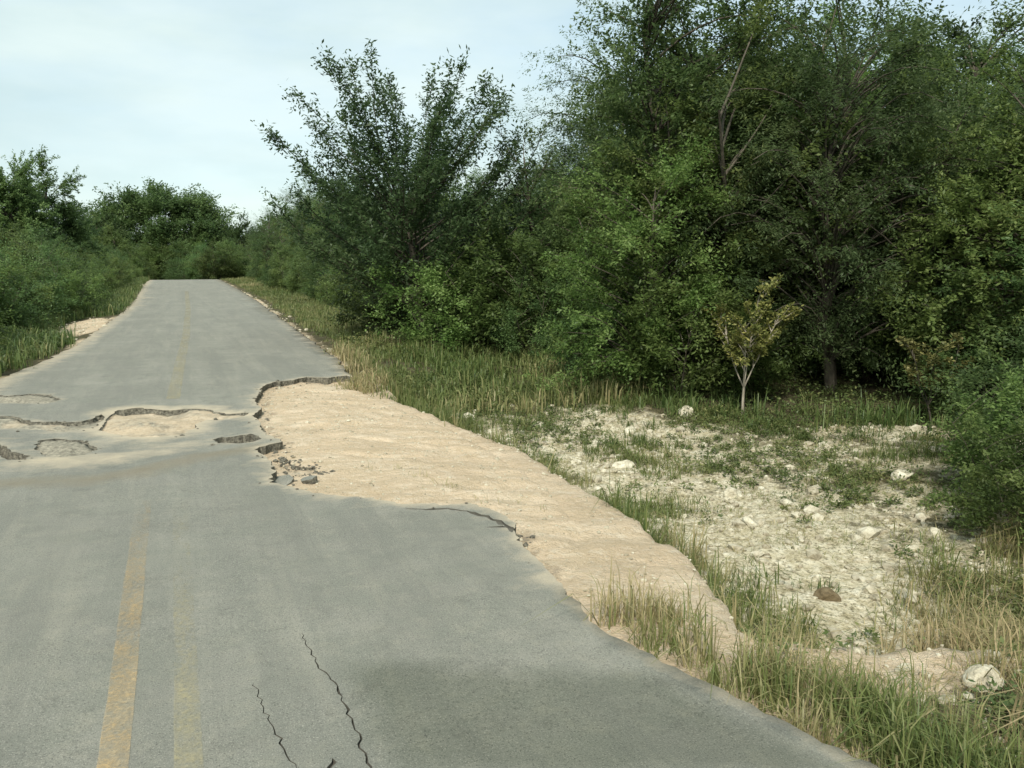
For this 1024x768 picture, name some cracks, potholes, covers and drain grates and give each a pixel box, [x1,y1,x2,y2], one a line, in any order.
pothole [99,408,248,437]
pothole [0,445,30,460]
pothole [34,439,98,457]
pothole [0,414,105,432]
crack [252,635,372,768]
crack [406,508,514,532]
pothole [213,434,261,443]
pothole [0,394,62,404]
